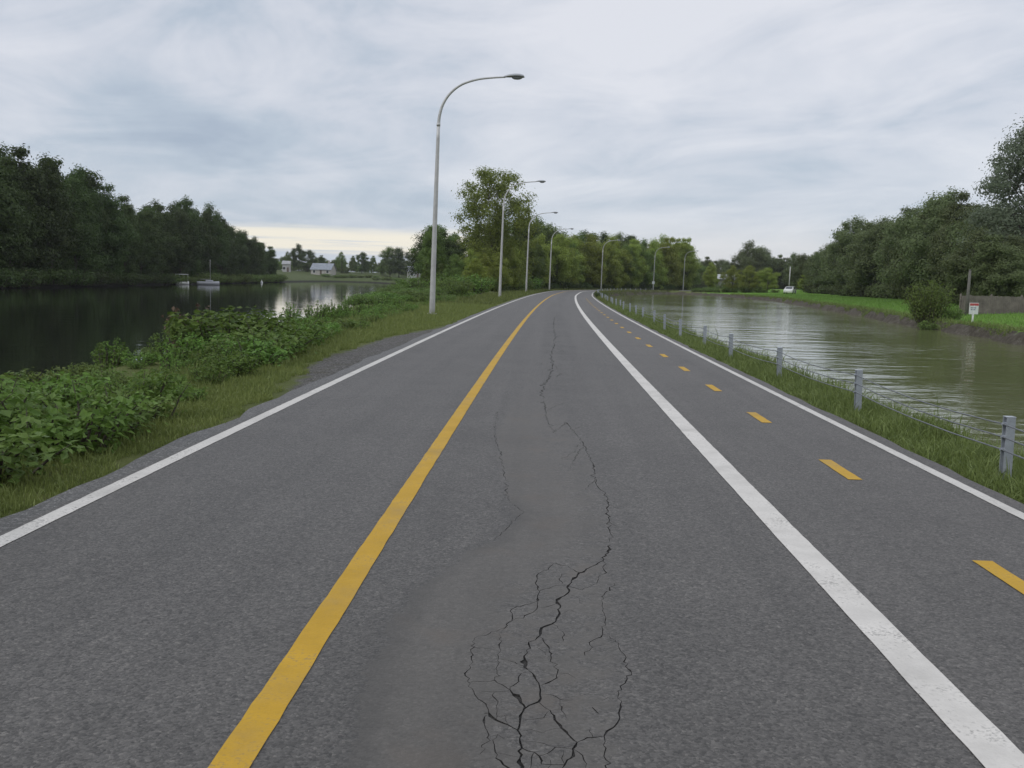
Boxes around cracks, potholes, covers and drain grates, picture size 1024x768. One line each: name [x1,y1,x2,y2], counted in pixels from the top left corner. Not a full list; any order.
crack [464,320,632,768]
